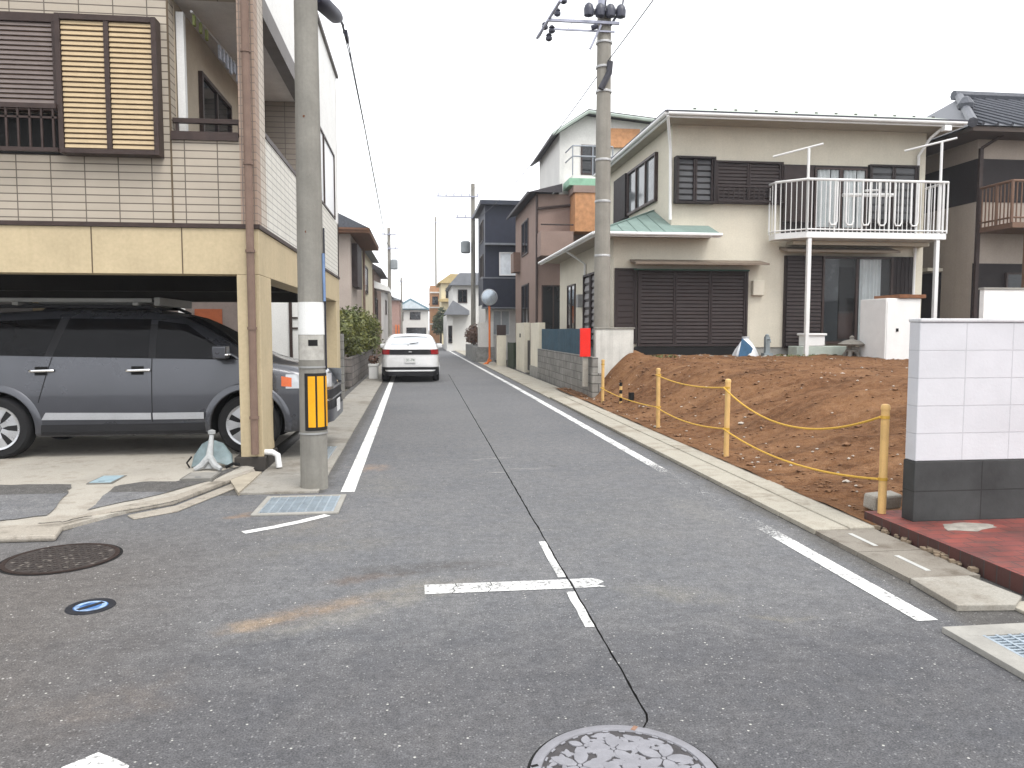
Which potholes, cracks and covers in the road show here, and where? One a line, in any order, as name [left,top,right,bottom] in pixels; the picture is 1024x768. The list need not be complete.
drain grate [251,494,346,517]
manhole cover [527,725,719,768]
utility cover [64,598,116,615]
crack [450,377,648,728]
drain grate [942,623,1024,680]
manhole cover [0,543,123,576]
